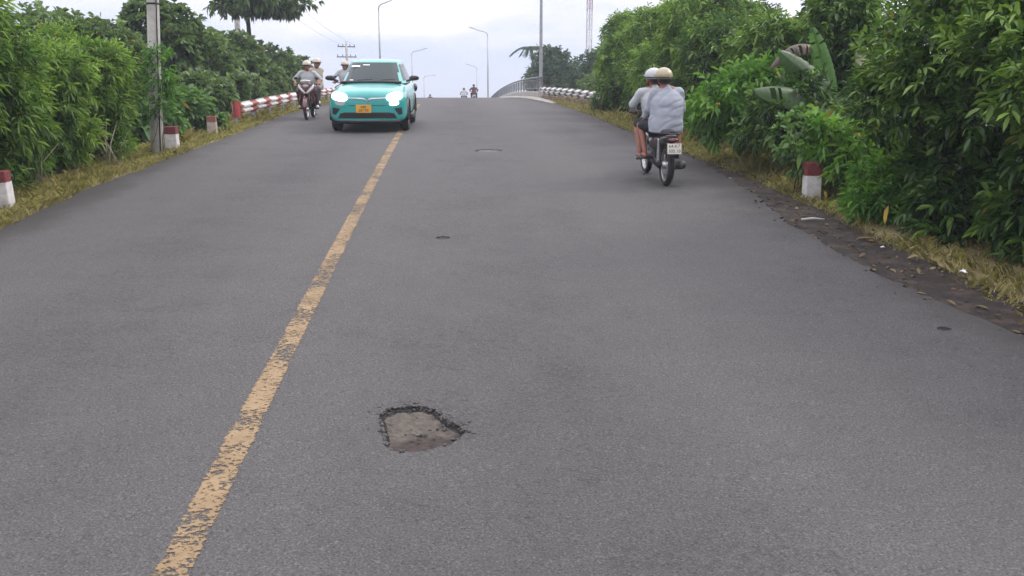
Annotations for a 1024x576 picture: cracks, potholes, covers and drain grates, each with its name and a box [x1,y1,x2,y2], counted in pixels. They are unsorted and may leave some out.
pothole [367,401,476,453]
